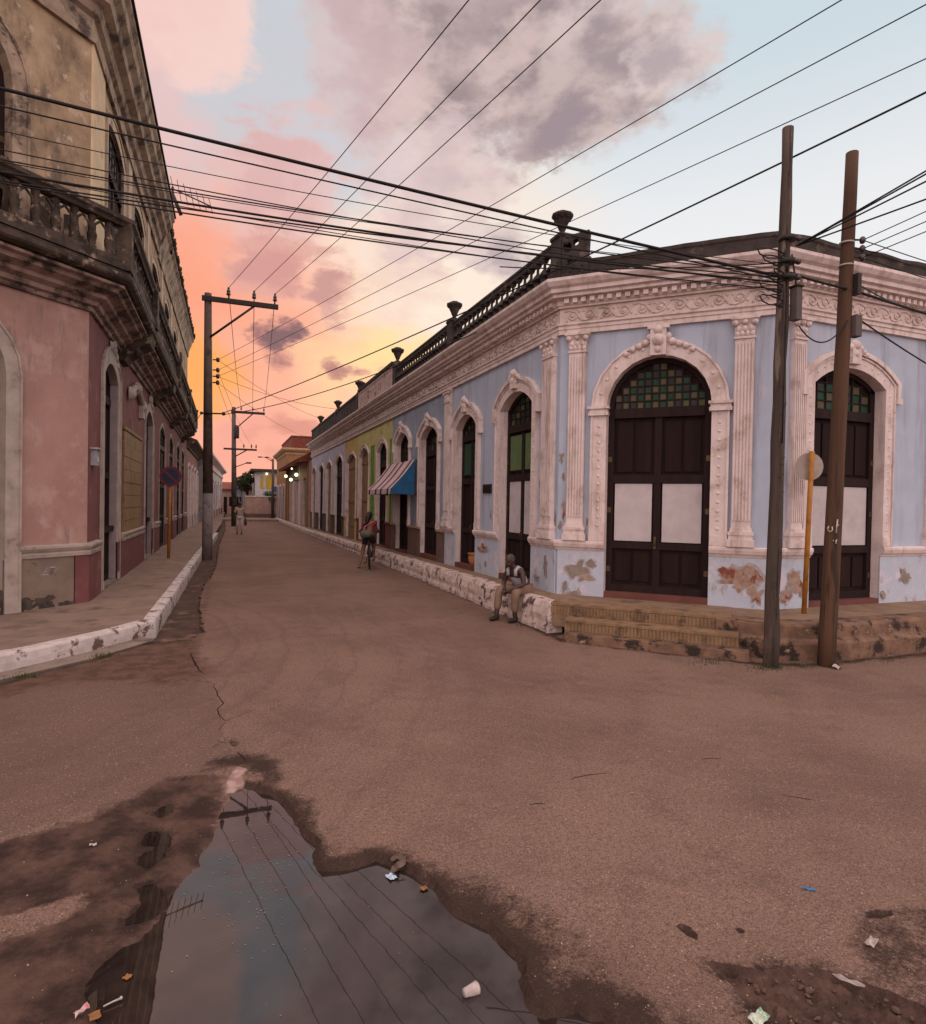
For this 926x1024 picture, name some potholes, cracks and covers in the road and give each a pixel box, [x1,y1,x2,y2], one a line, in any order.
pothole [707,960,926,1024]
crack [190,653,255,730]
pothole [0,767,627,1024]
